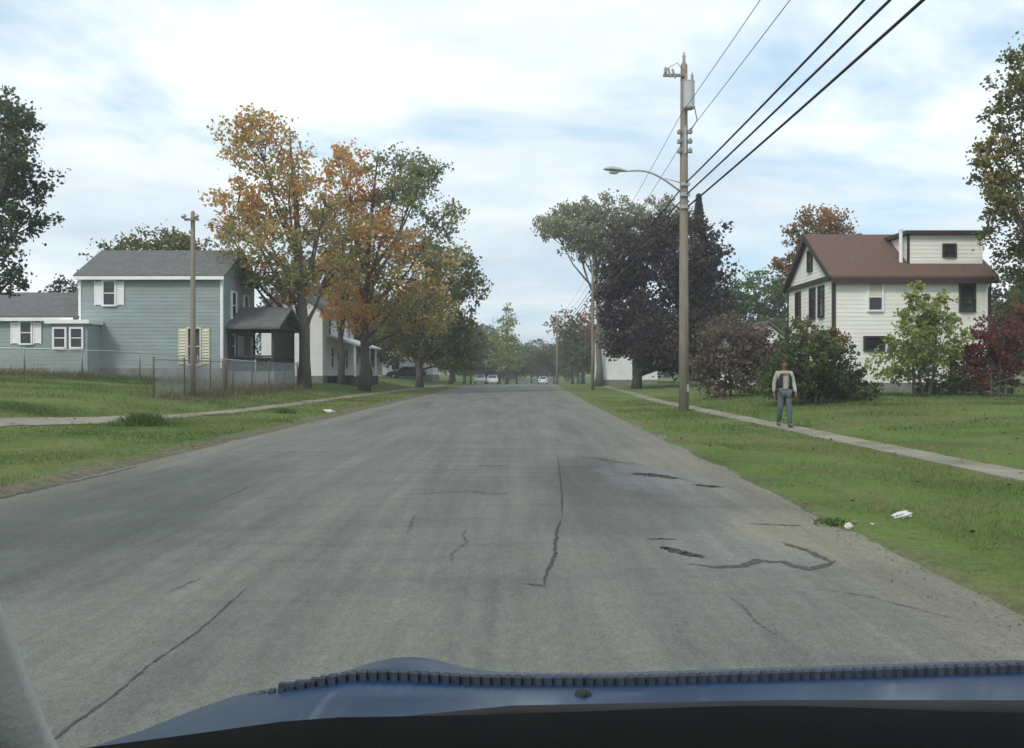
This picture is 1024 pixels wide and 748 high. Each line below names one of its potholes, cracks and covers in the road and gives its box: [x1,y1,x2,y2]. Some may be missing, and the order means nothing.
crack [528,459,564,585]
crack [54,591,242,739]
pothole [651,544,720,562]
pothole [627,472,688,480]
